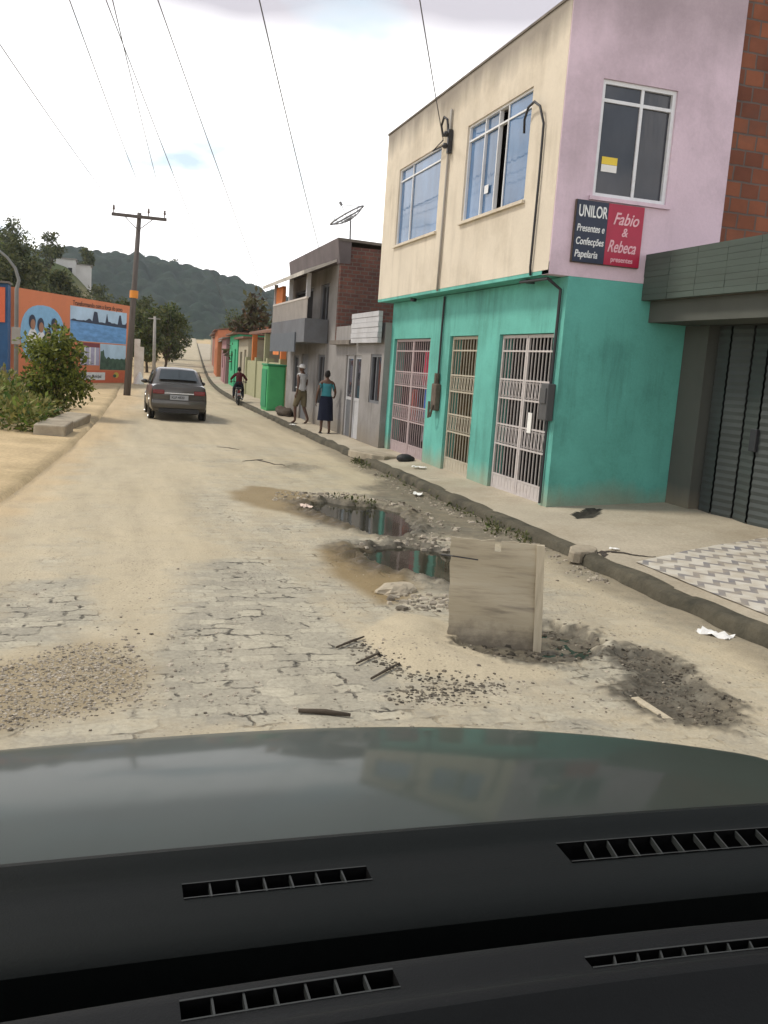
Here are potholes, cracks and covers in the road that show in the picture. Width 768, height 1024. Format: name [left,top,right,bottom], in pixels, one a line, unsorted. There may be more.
pothole [310,495,419,536]
pothole [357,542,451,579]
